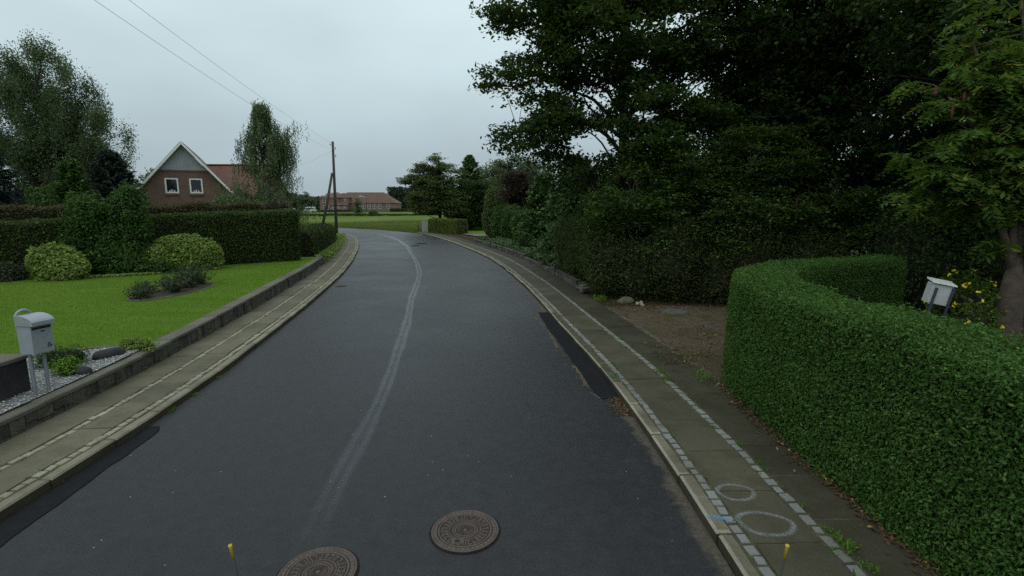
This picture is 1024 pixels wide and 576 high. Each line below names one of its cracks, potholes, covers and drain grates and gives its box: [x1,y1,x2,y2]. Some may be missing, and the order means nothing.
manhole cover [429,510,501,554]
manhole cover [276,546,360,576]
